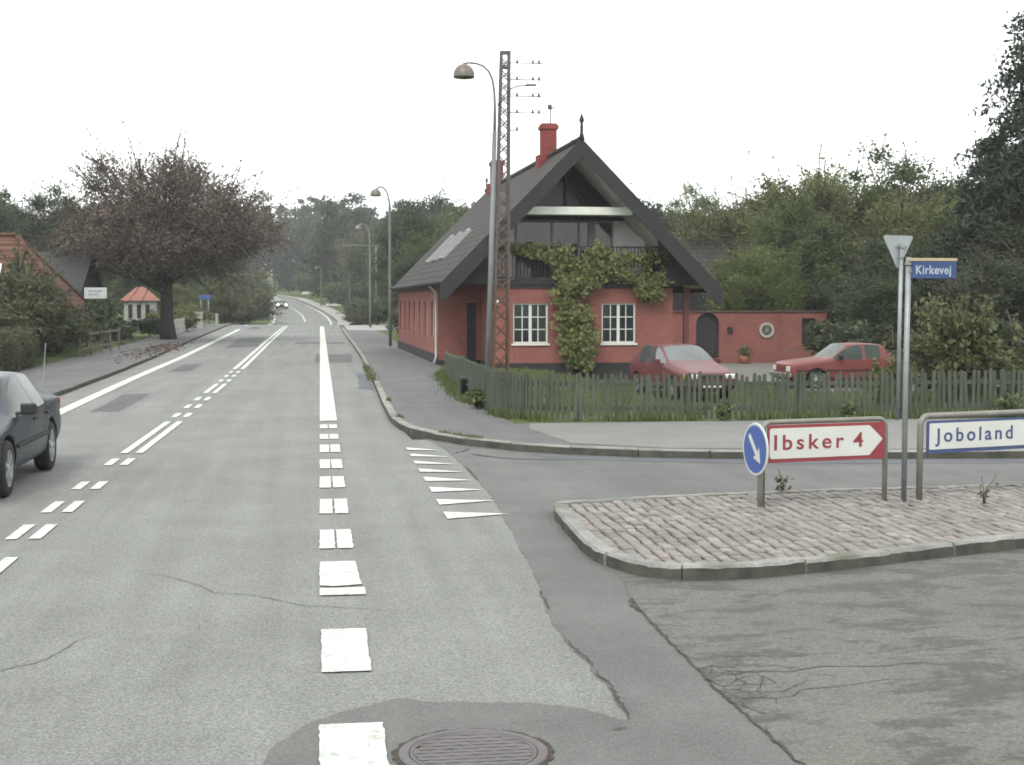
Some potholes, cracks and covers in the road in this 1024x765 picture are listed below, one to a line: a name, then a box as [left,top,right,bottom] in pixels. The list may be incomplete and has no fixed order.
crack [138,571,395,611]
manhole cover [391,728,555,765]
crack [629,597,930,765]
crack [2,636,89,670]
